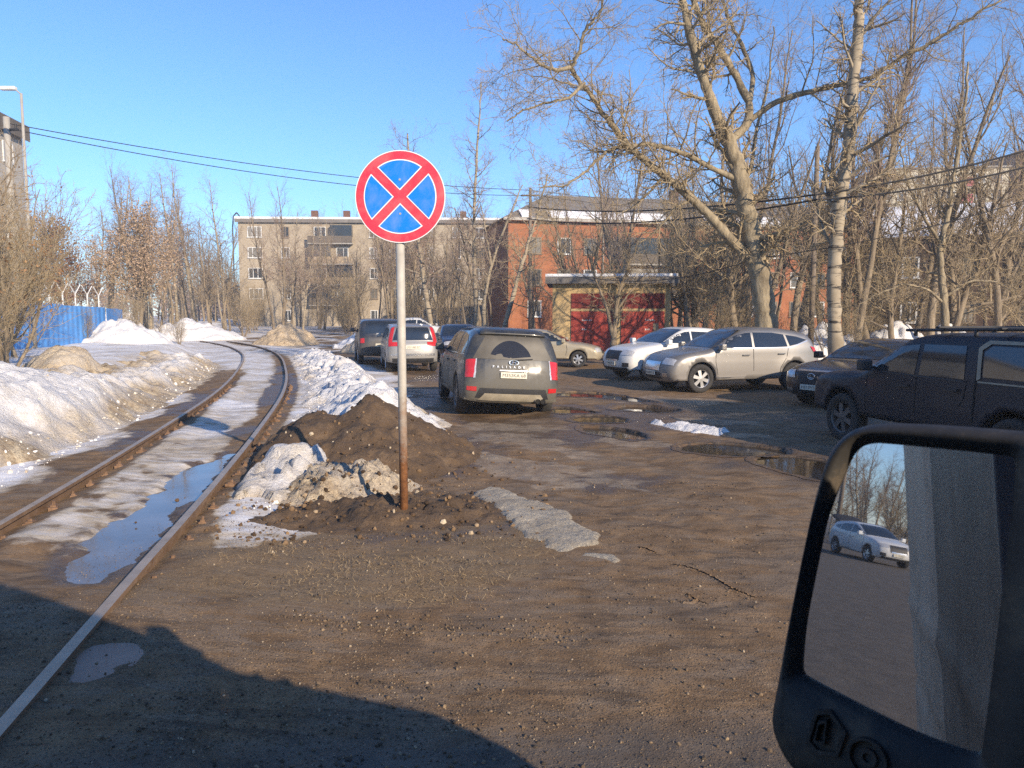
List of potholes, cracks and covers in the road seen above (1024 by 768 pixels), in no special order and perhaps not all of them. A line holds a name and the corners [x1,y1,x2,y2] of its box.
pothole [745,454,828,481]
pothole [565,414,633,424]
pothole [671,441,798,458]
pothole [574,424,654,441]
crack [638,546,756,606]
